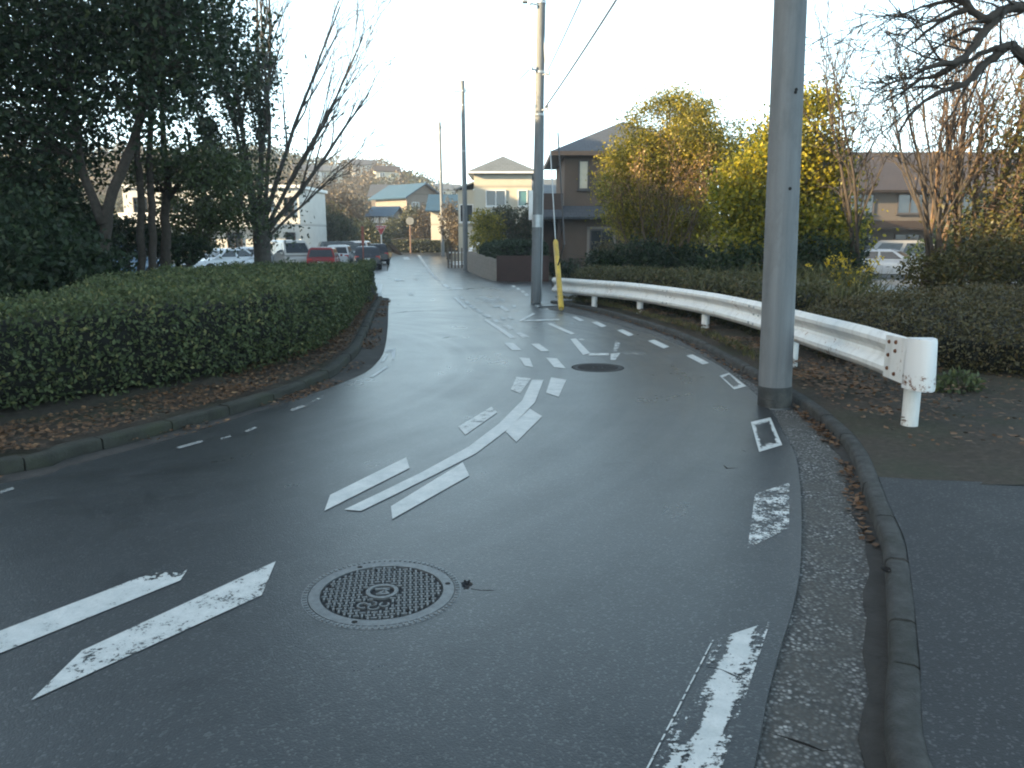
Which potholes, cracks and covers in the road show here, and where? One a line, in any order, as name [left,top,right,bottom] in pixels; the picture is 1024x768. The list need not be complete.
manhole cover [301,559,461,630]
crack [769,732,831,751]
manhole cover [571,363,624,372]
